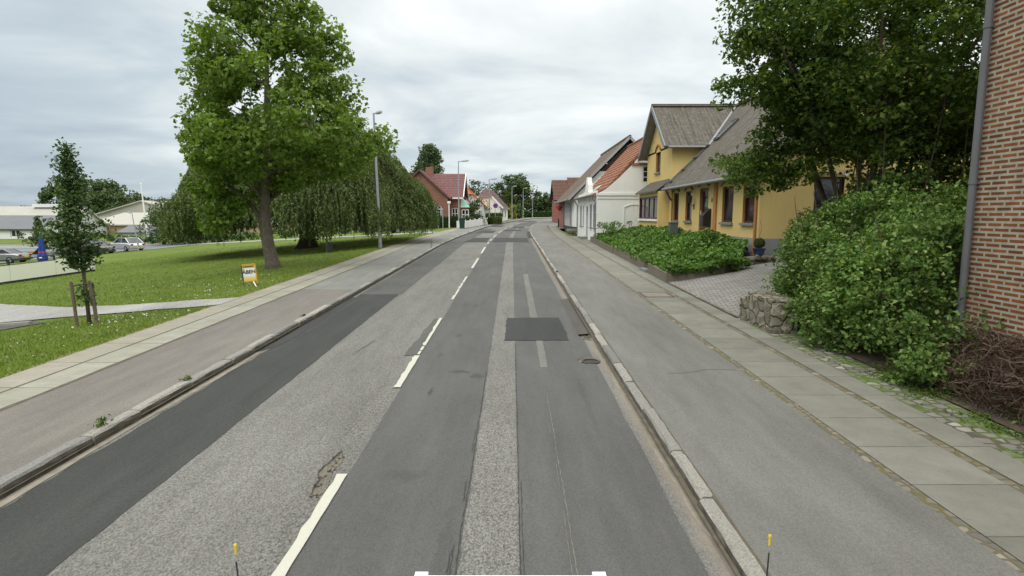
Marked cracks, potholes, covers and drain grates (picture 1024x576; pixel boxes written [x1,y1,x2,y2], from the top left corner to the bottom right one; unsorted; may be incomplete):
crack [547,396,579,576]
pothole [309,450,344,498]
